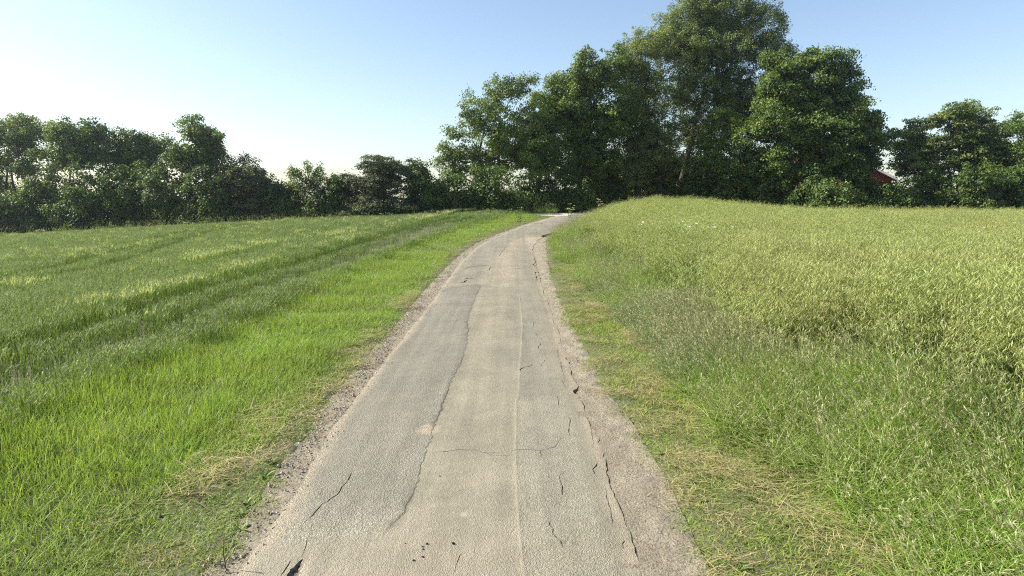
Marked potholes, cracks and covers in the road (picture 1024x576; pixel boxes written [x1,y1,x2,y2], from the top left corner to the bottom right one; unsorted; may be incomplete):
crack [442,322,571,498]
crack [281,473,352,576]
pothole [287,559,303,576]
